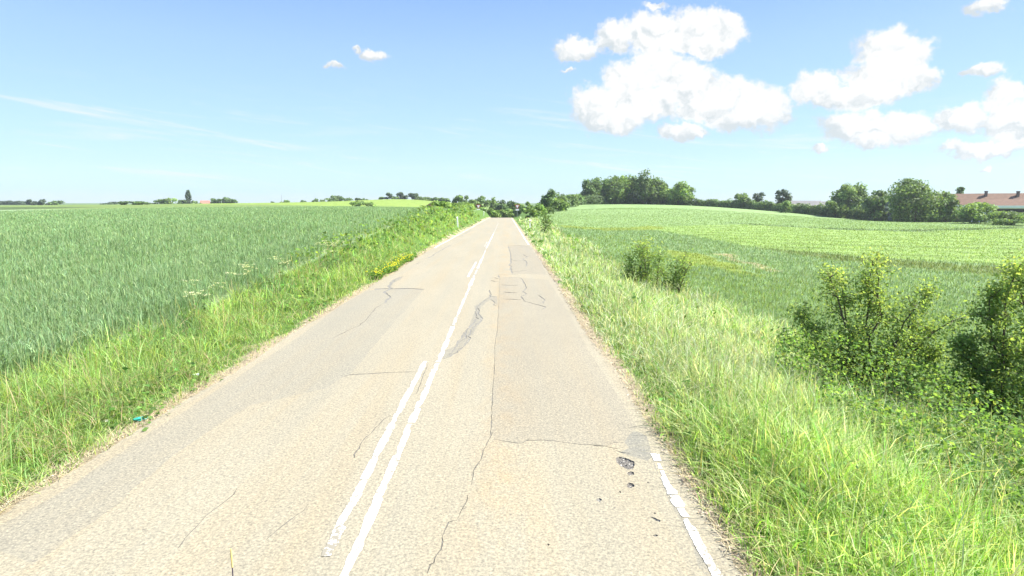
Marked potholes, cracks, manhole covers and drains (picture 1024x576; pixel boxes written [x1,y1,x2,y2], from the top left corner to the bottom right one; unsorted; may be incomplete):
crack [342,231,470,334]
crack [416,246,631,573]
pothole [616,457,635,469]
crack [177,490,236,549]
